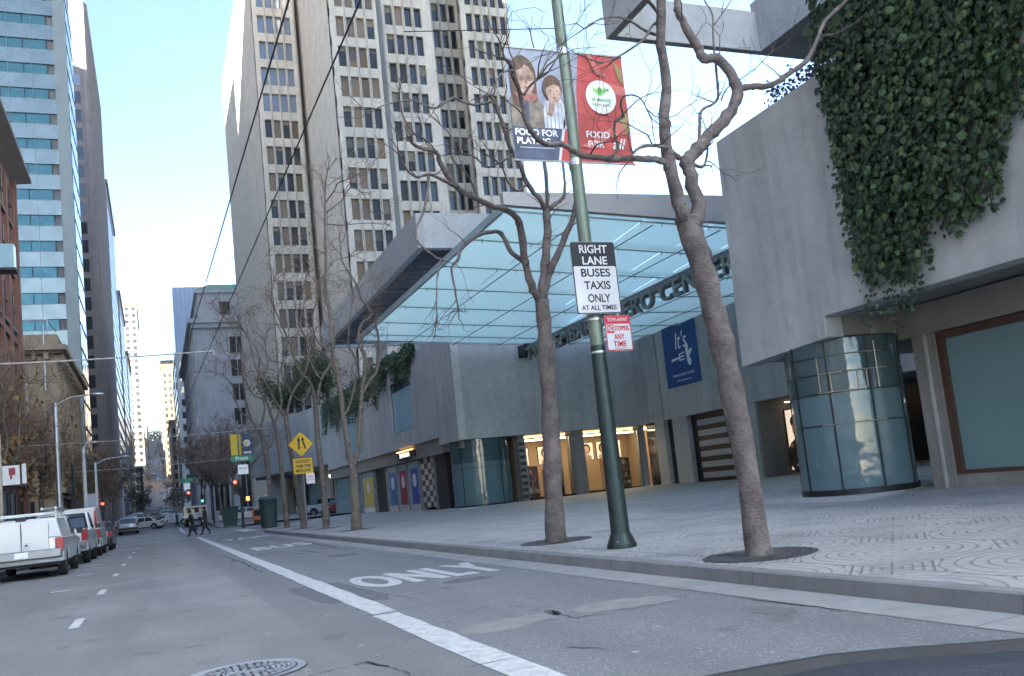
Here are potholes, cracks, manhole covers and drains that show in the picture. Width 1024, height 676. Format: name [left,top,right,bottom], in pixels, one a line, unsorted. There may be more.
manhole cover [191,658,308,676]
